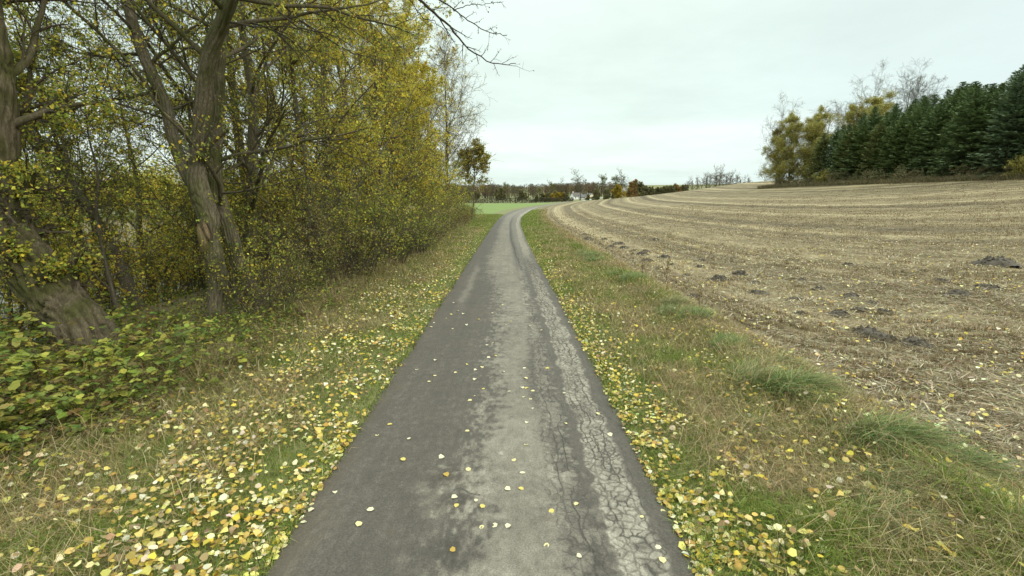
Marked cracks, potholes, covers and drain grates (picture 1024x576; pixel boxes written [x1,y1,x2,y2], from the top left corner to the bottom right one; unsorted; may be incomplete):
crack [524,260,651,554]
